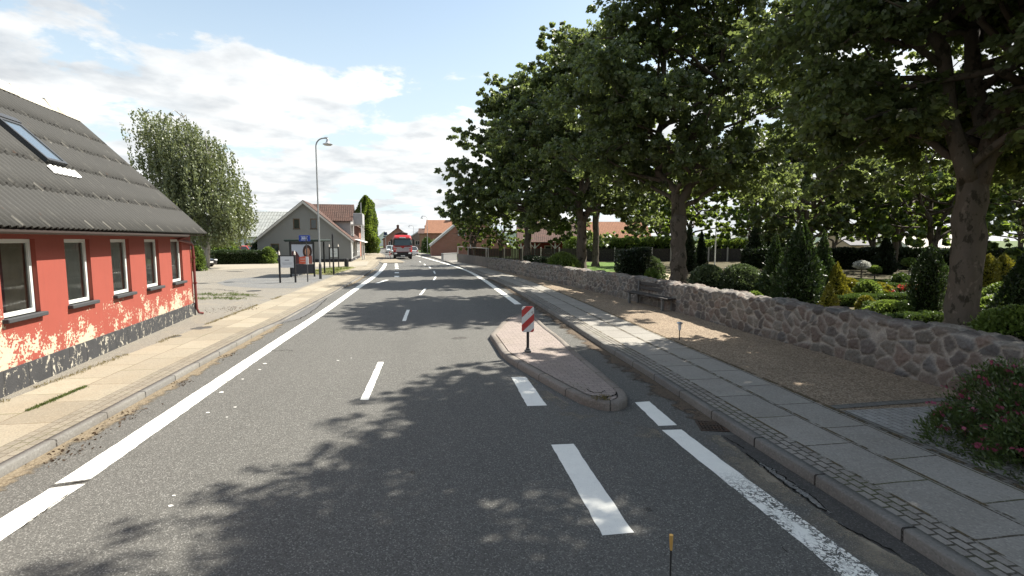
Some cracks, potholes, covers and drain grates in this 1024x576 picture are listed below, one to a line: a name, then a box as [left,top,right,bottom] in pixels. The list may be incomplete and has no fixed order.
drain grate [695,420,730,432]
crack [724,436,902,557]
